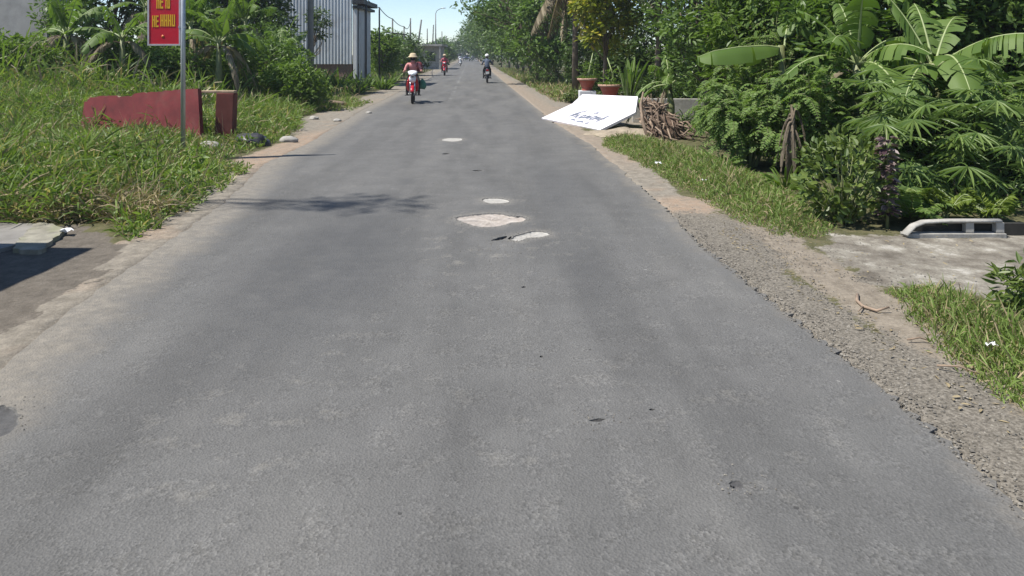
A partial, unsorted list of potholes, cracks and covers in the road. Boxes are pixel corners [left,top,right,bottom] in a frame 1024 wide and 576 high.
pothole [729,481,744,490]
